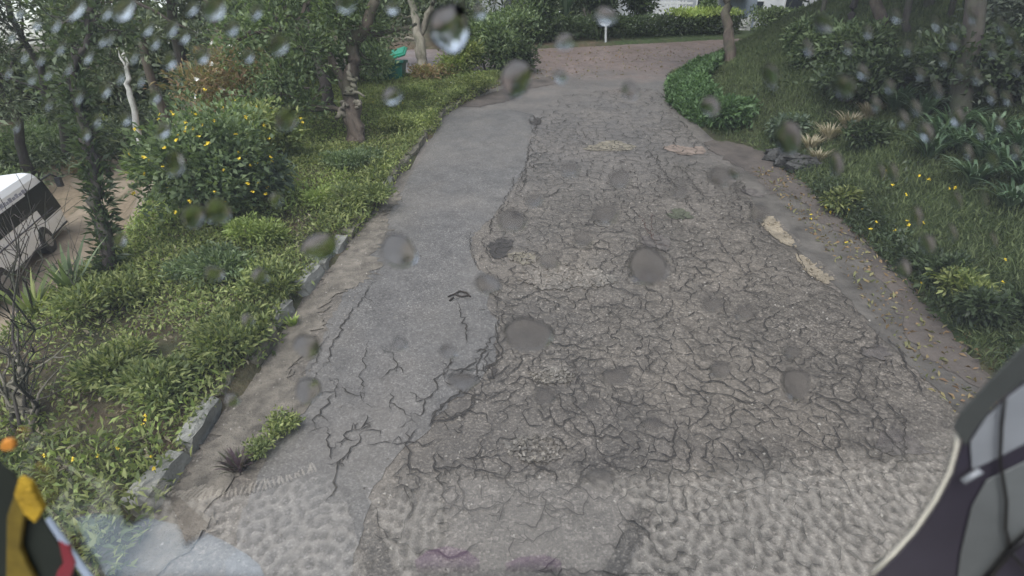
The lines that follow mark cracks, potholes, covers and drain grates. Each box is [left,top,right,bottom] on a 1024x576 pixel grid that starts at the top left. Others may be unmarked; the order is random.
pothole [487,238,515,259]
crack [298,88,925,576]
